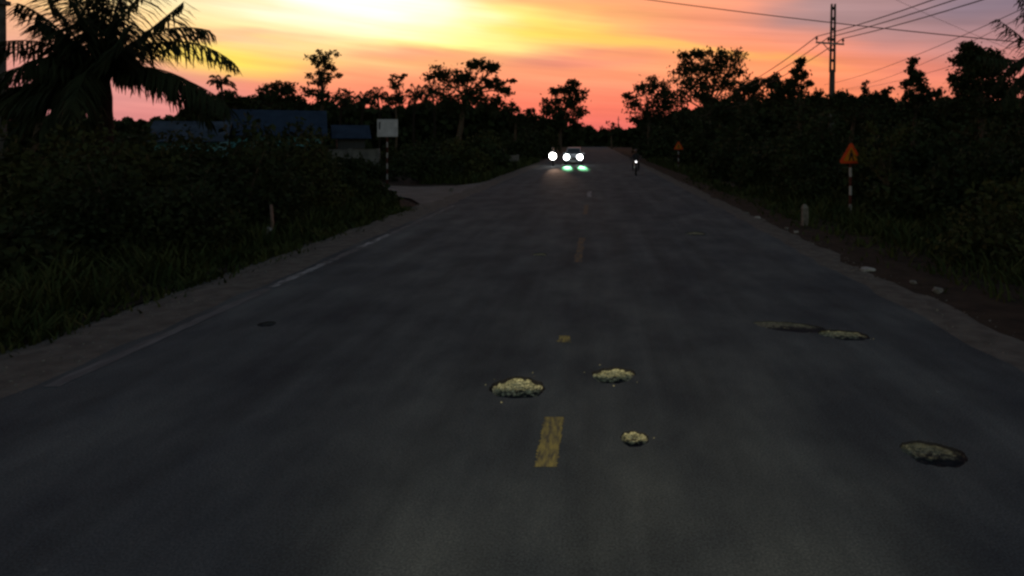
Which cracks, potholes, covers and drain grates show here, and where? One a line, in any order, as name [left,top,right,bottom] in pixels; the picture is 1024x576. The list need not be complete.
pothole [752,321,826,333]
pothole [584,367,636,386]
pothole [620,430,649,447]
pothole [899,440,968,468]
pothole [485,372,545,403]
pothole [818,330,874,341]
